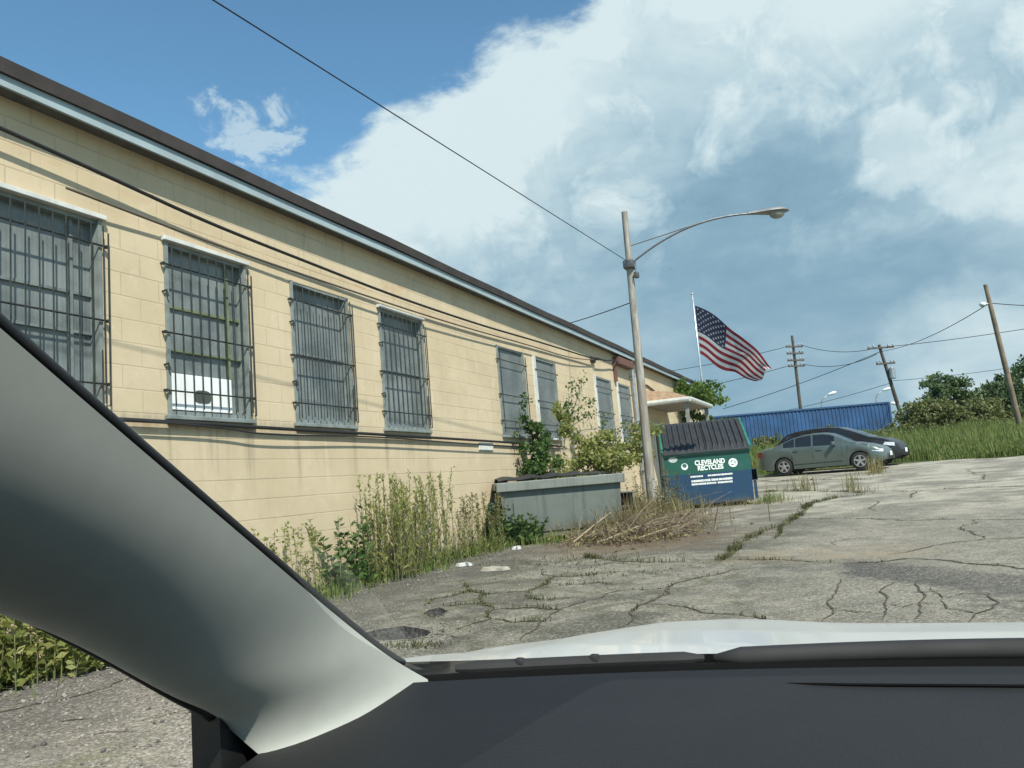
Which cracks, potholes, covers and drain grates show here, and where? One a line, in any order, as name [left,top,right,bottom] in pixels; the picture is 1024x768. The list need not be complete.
crack [423,469,1024,640]
pothole [367,626,432,641]
pothole [424,608,448,617]
